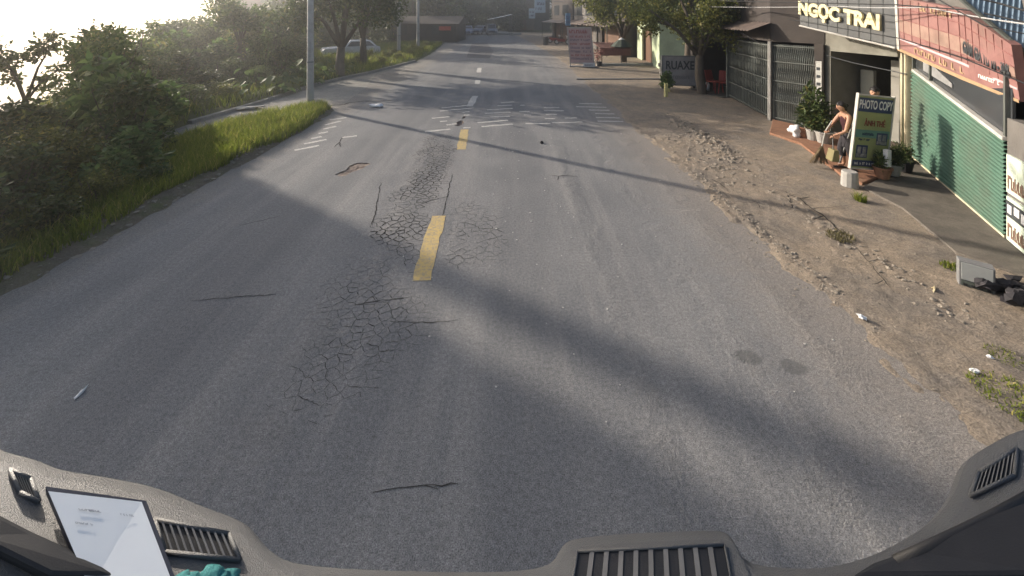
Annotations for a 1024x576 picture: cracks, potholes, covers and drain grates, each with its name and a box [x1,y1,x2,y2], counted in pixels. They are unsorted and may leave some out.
crack [266,261,434,424]
crack [785,191,847,230]
crack [860,252,894,292]
pothole [336,162,369,176]
crack [373,482,457,493]
crack [370,135,512,273]
